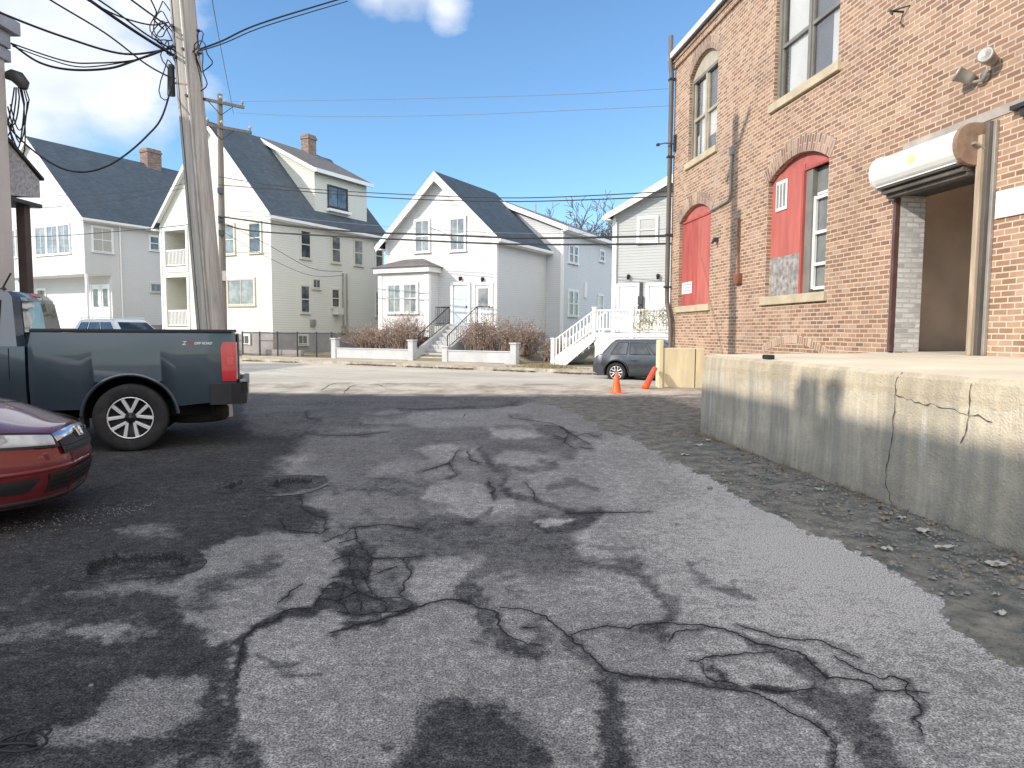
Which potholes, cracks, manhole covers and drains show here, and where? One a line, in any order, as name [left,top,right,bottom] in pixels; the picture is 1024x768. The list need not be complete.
crack [437,405,597,449]
crack [236,485,930,768]
pothole [70,547,207,582]
pothole [257,474,328,493]
